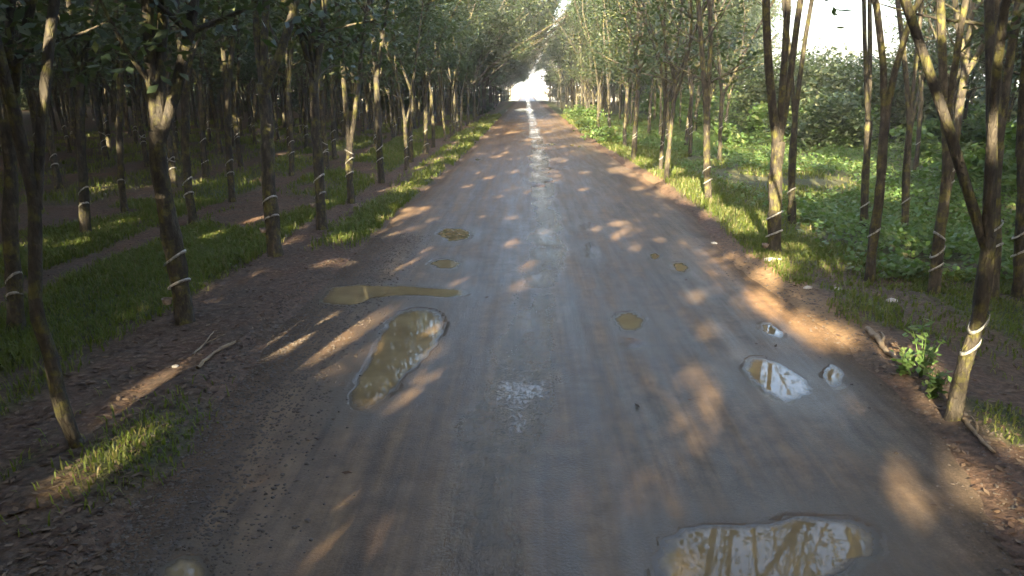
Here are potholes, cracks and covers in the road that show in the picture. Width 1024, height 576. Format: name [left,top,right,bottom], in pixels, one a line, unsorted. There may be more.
pothole [309,282,477,308]
pothole [629,505,904,576]
pothole [420,257,471,271]
pothole [749,321,795,342]
pothole [604,309,657,336]
pothole [429,227,478,243]
pothole [664,260,698,275]
pothole [334,306,454,417]
pothole [730,353,833,408]
pothole [641,251,668,262]
